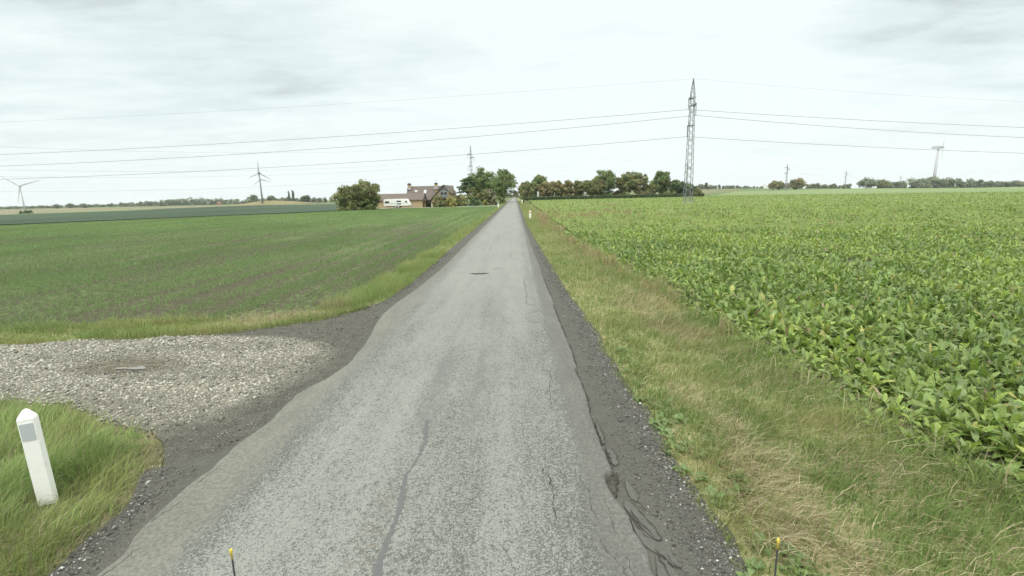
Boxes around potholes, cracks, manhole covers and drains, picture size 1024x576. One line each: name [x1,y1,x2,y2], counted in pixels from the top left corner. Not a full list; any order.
crack [604,495,687,574]
pothole [606,473,617,498]
crack [542,465,562,519]
crack [544,279,617,469]
